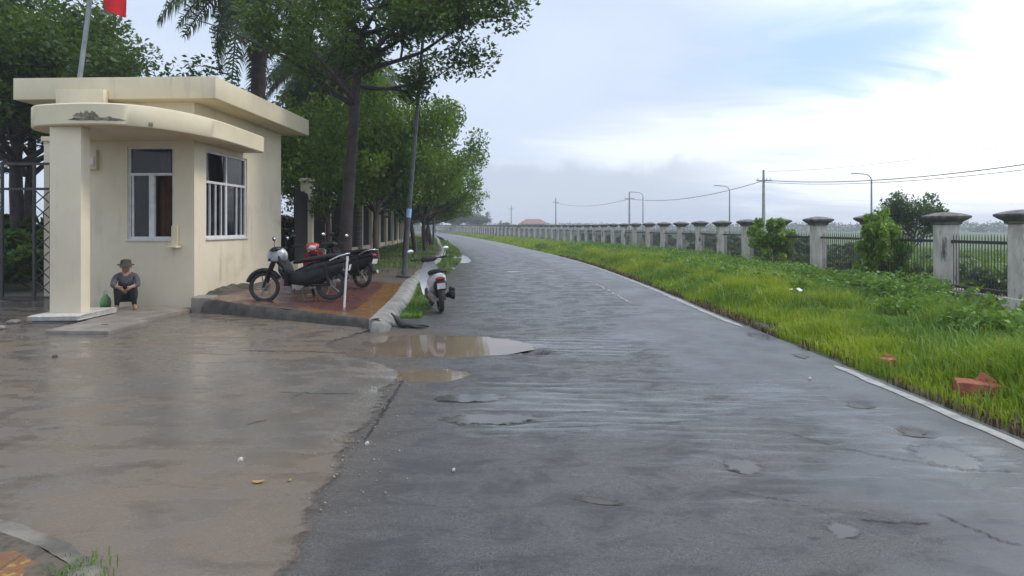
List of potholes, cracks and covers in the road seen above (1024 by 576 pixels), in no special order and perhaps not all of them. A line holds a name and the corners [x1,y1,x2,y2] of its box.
crack [864,513,1019,544]
crack [784,431,1009,471]
pothole [897,427,927,437]
pothole [574,495,623,505]
